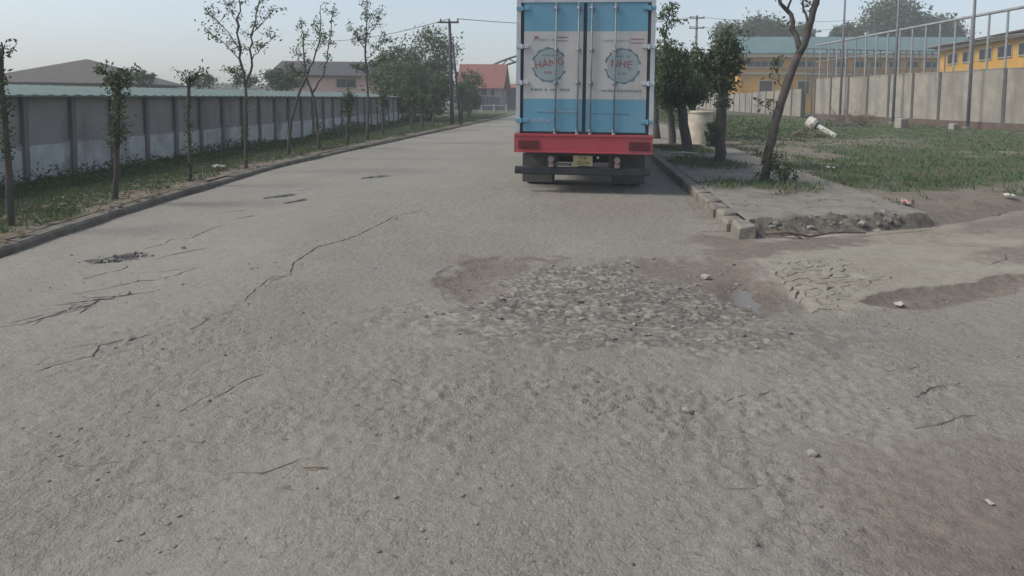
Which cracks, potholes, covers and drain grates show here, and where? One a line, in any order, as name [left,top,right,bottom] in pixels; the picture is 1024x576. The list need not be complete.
crack [885,364,980,429]
pothole [83,252,153,264]
pothole [431,256,792,331]
crack [12,335,148,378]
crack [180,372,270,412]
crack [227,456,305,474]
crack [775,259,894,313]
pothole [860,274,1024,310]
crack [4,210,256,327]
crack [191,210,424,329]
